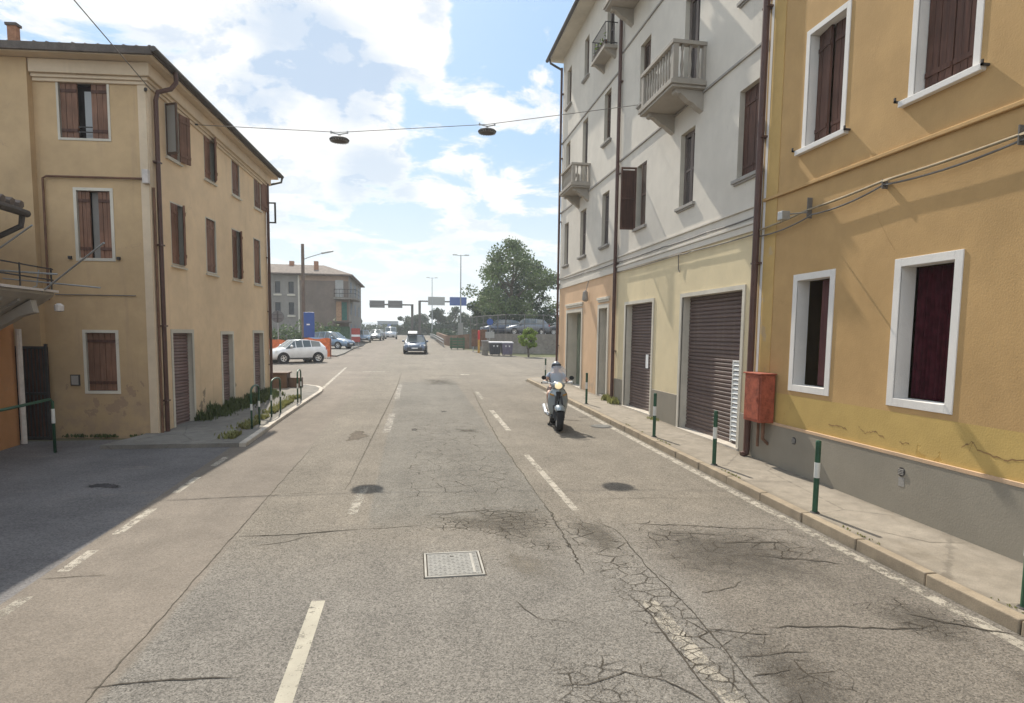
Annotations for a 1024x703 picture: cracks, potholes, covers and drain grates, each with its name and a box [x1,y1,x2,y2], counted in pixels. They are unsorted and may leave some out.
crack [541,520,1022,703]
manhole cover [423,551,487,579]
